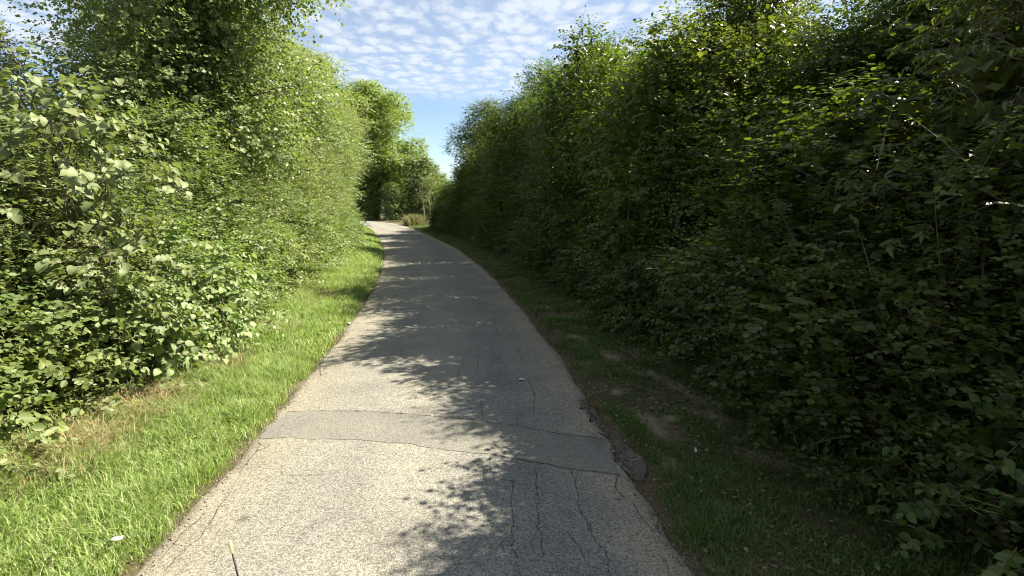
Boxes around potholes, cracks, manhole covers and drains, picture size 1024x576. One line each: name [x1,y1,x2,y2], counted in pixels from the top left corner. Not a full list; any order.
crack [159,495,229,574]
crack [489,454,544,573]
crack [567,471,611,576]
crack [454,318,565,423]
